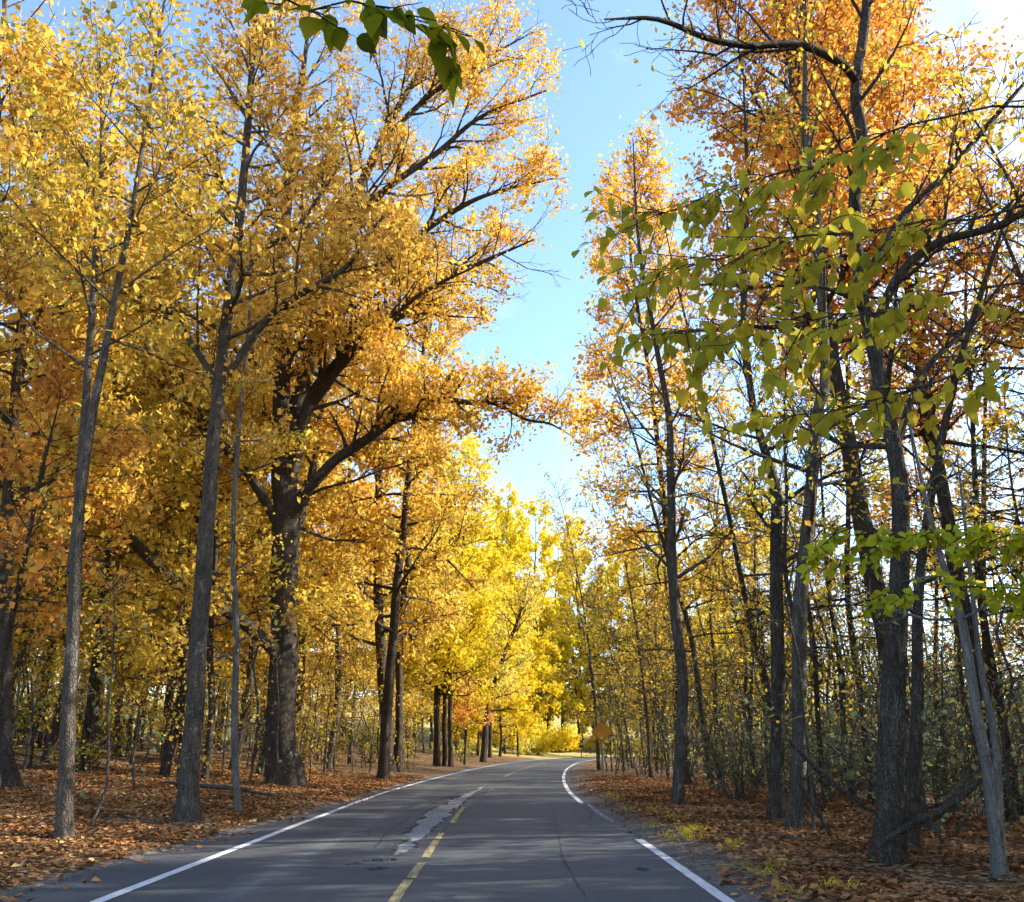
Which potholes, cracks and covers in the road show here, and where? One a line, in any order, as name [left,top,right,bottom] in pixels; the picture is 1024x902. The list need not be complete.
crack [368,792,466,859]
crack [547,790,586,897]
